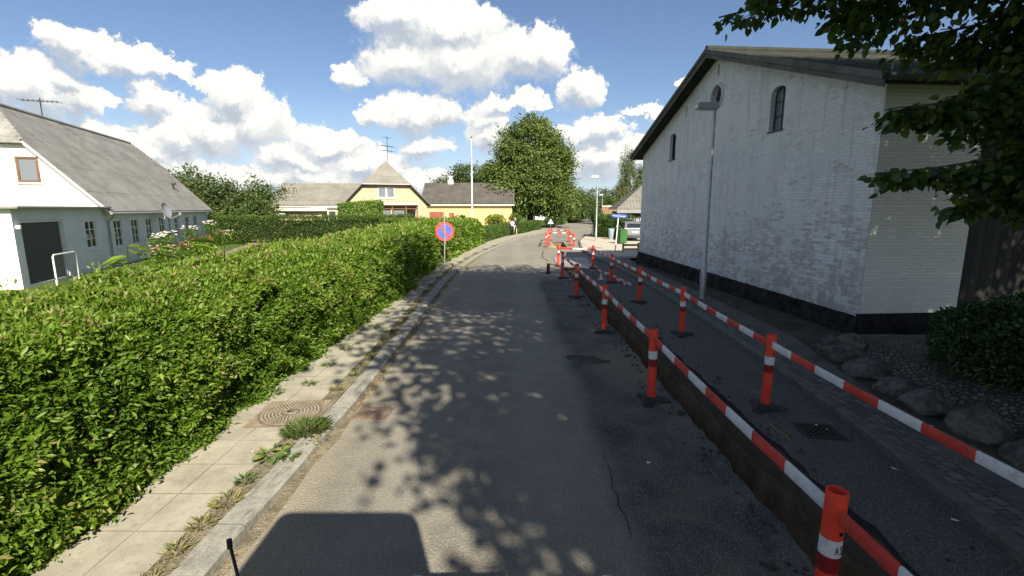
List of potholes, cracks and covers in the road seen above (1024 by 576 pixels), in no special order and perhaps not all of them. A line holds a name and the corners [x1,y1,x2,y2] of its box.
manhole cover [352,406,395,420]
drain grate [791,422,849,441]
manhole cover [243,400,331,428]
pothole [566,355,611,365]
